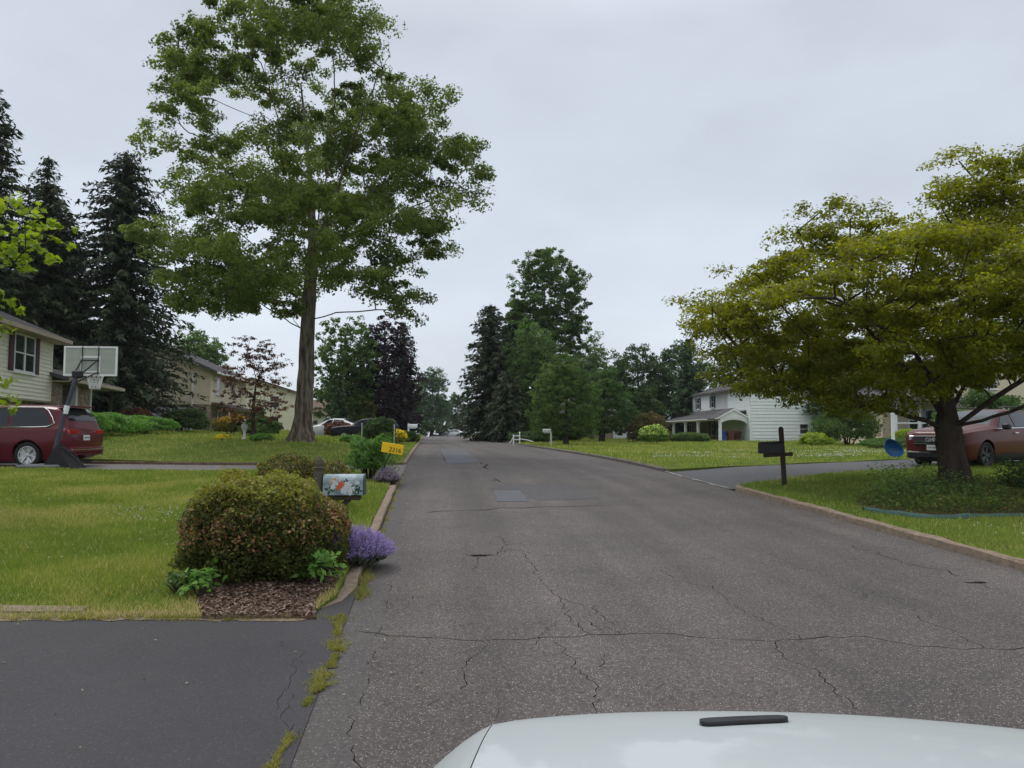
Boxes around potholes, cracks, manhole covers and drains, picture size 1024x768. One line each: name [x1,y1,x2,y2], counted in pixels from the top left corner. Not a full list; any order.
crack [355,536,1021,714]
crack [273,653,304,755]
